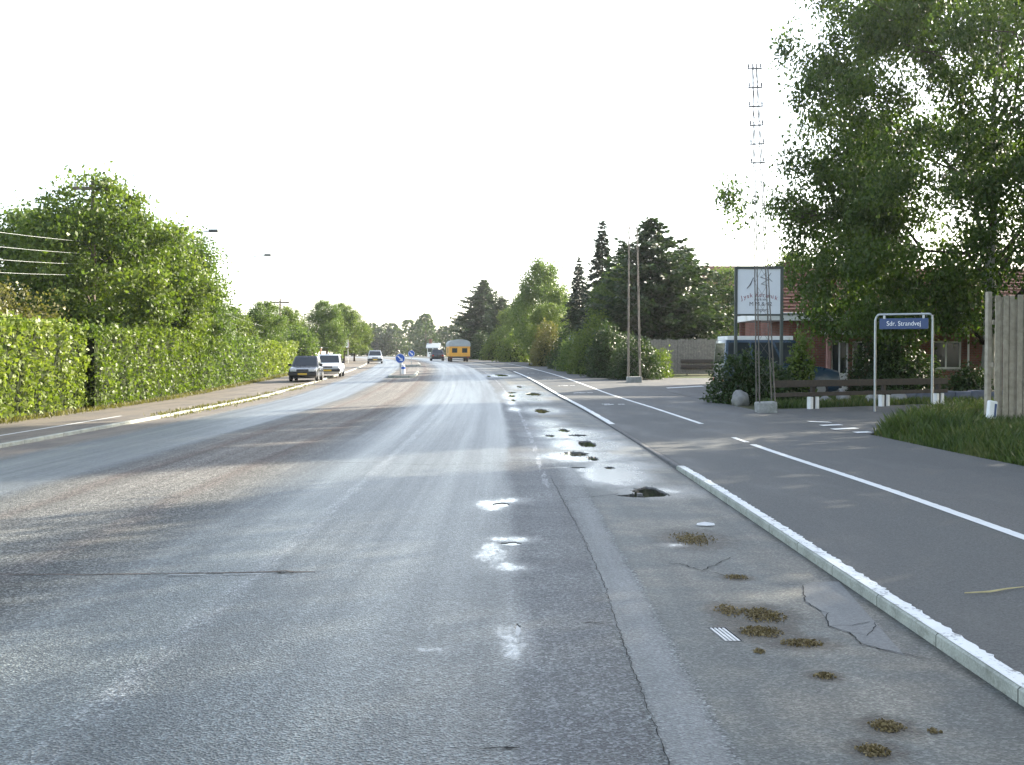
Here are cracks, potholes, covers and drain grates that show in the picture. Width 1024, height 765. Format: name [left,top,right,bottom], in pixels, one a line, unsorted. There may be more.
pothole [615,486,670,498]
crack [802,586,928,659]
drain grate [707,627,744,642]
